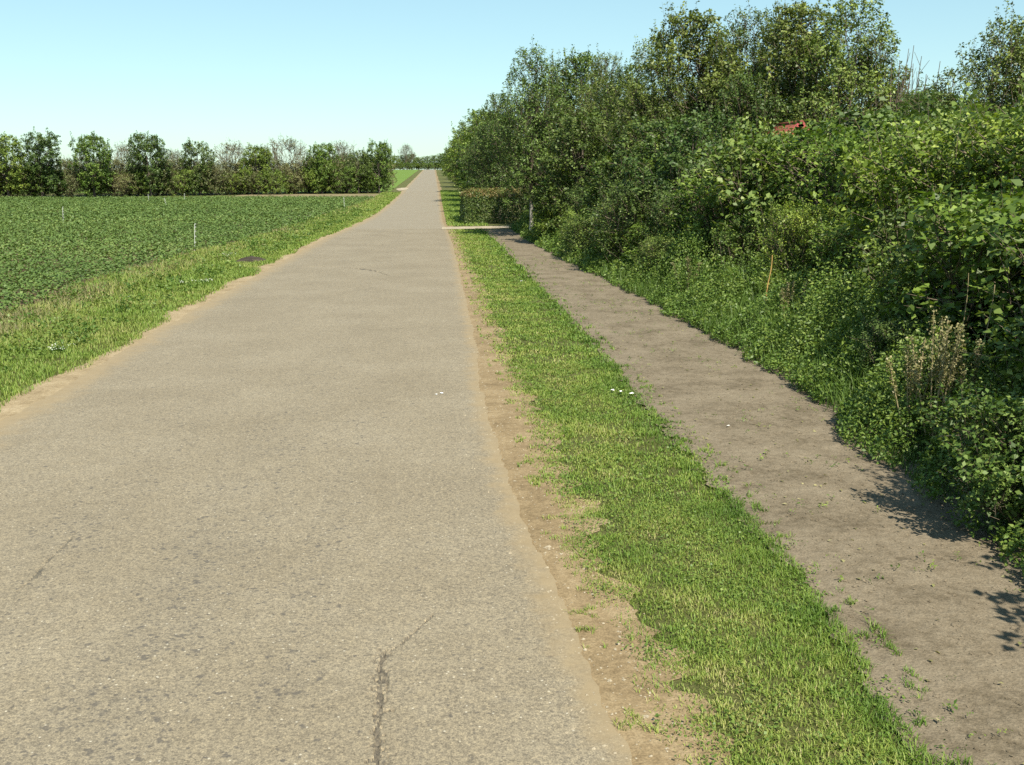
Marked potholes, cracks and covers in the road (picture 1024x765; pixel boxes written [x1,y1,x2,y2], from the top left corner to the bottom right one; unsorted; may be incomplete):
crack [24,532,78,586]
crack [366,615,433,765]
